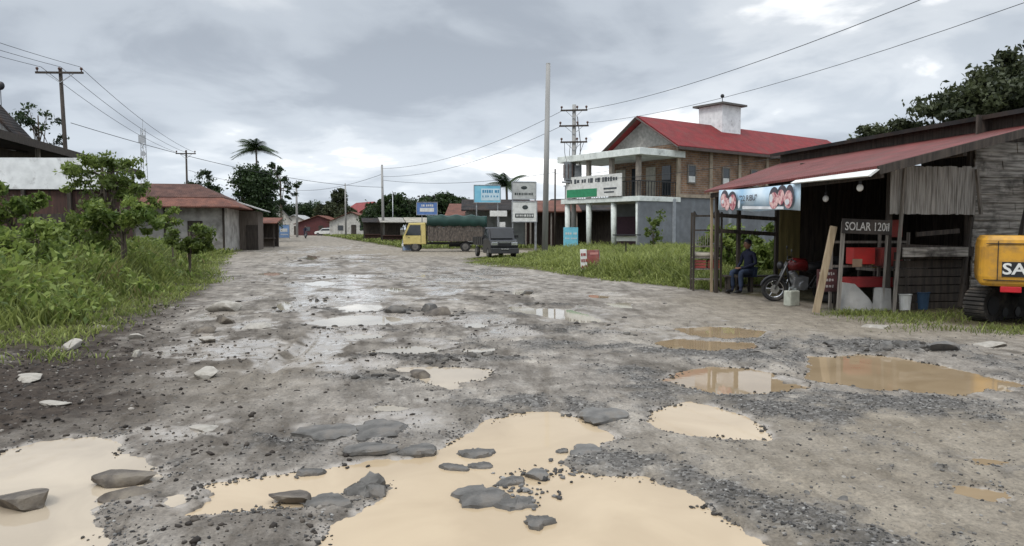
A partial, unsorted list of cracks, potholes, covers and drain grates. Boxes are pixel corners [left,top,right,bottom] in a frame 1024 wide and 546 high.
pothole [0,426,196,546]
pothole [139,402,822,546]
pothole [664,323,783,339]
pothole [933,477,1024,506]
pothole [288,312,426,328]
pothole [364,362,511,393]
pothole [644,360,830,396]
pothole [499,305,617,323]
pothole [784,349,1024,400]
pothole [639,335,777,352]
